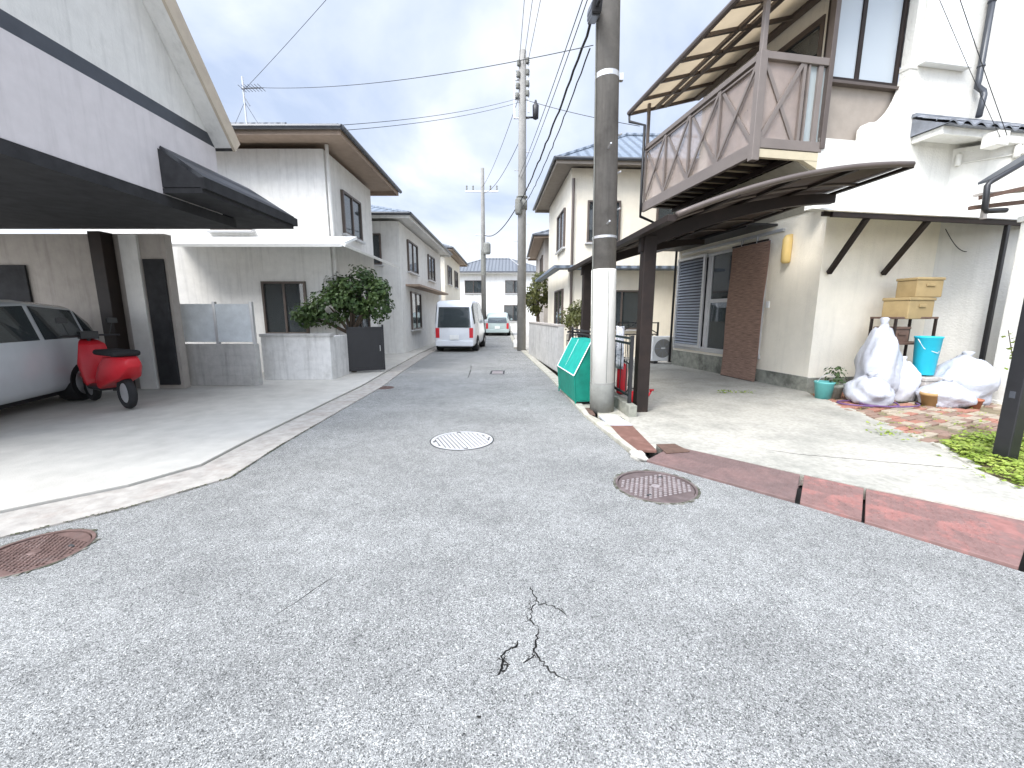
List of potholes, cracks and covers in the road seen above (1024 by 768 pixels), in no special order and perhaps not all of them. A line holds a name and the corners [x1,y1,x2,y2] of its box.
manhole cover [0,528,101,579]
manhole cover [612,469,701,505]
crack [497,586,567,680]
manhole cover [430,431,494,451]
